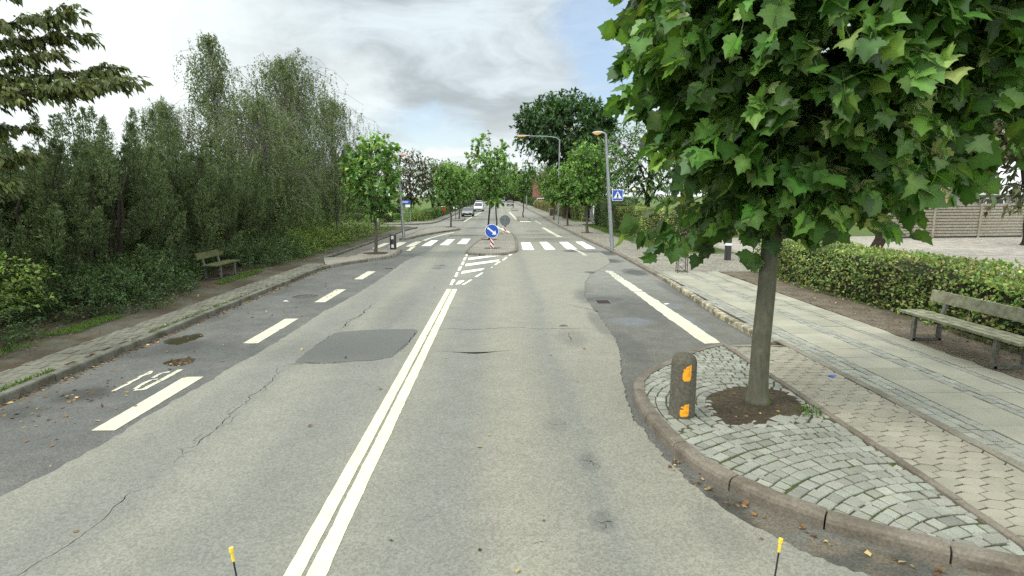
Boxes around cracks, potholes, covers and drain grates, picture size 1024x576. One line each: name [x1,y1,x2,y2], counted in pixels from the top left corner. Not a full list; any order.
pothole [163,358,196,366]
pothole [163,333,204,345]
crack [177,368,284,459]
crack [19,486,152,575]
